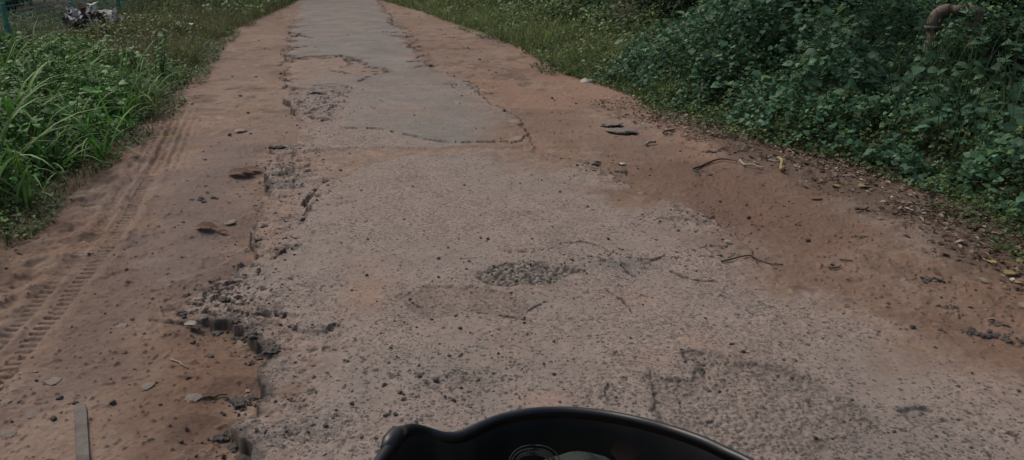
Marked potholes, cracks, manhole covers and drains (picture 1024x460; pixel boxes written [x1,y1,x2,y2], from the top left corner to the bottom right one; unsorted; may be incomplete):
pothole [469,259,586,287]
crack [460,240,759,317]
crack [282,11,531,144]
